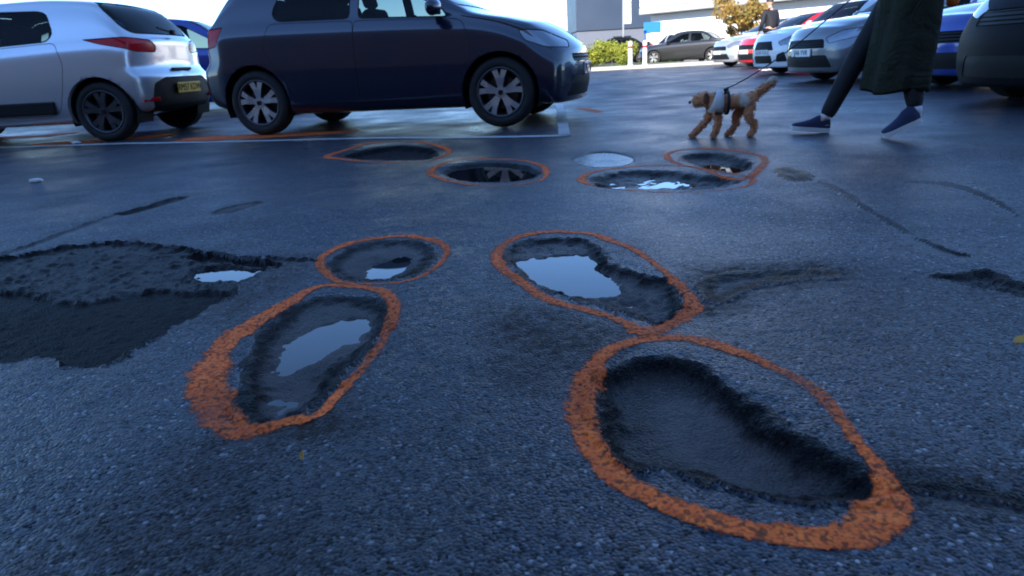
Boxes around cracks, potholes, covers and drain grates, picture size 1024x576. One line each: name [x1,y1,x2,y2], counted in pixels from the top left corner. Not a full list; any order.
pothole [774,167,814,182]
pothole [678,152,752,174]
pothole [443,162,543,183]
pothole [591,353,874,507]
pothole [693,267,845,304]
crack [916,237,970,258]
pothole [929,268,1024,298]
pothole [325,239,441,282]
pothole [229,295,397,425]
crack [904,180,1019,217]
pothole [344,145,439,161]
pothole [502,236,685,325]
